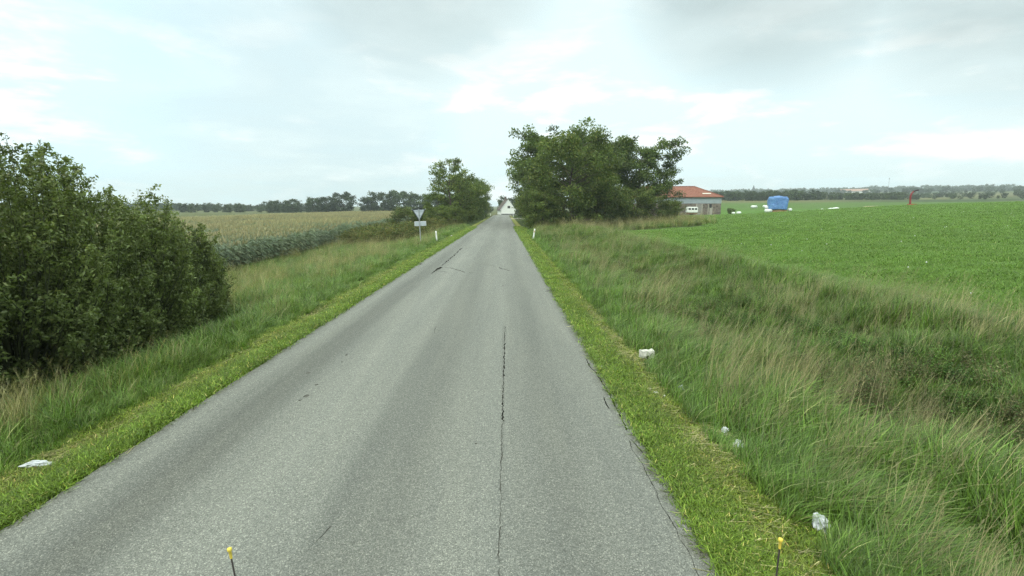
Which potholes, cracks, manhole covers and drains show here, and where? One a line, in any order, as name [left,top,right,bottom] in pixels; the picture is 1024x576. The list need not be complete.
crack [497,327,506,576]
crack [586,359,699,576]
